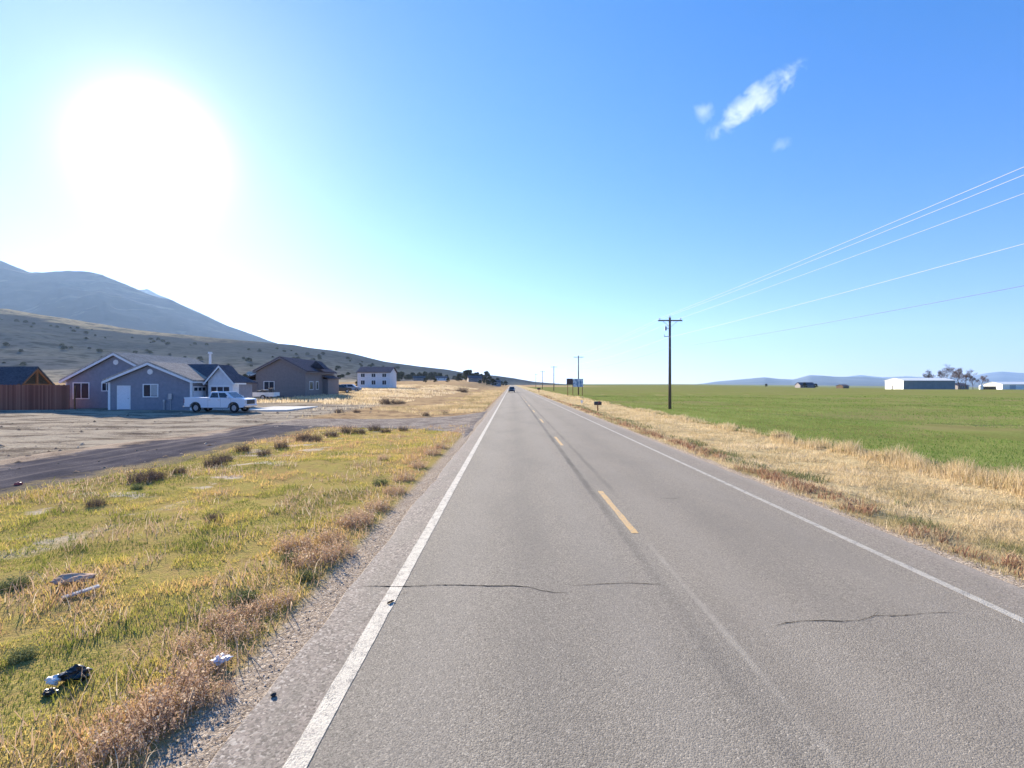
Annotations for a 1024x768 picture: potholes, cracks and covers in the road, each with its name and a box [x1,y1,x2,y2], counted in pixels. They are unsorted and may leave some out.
crack [775,612,941,626]
crack [386,583,660,595]
